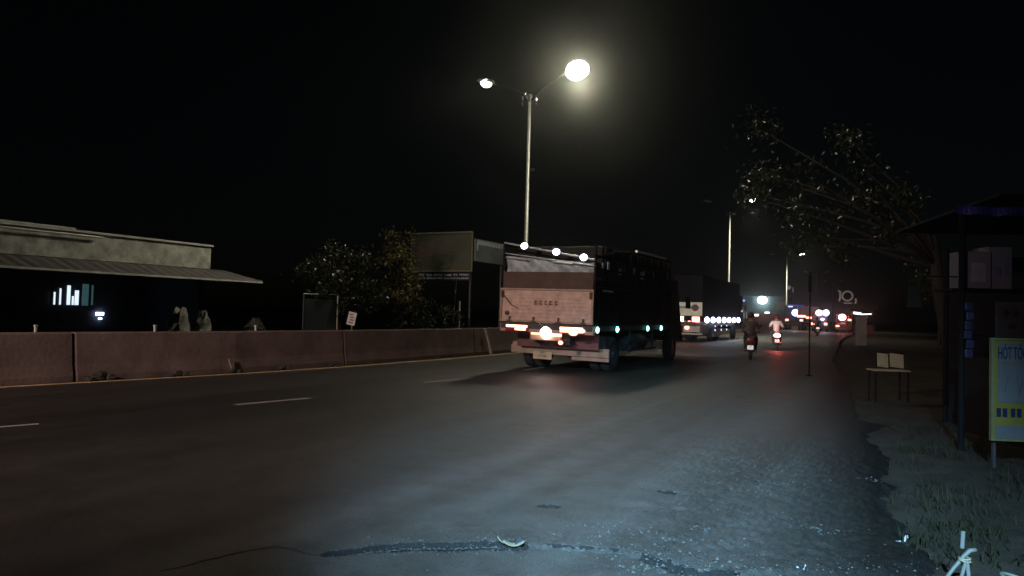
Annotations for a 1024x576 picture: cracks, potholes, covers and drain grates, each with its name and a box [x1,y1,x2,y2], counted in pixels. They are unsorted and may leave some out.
crack [161,546,331,571]
